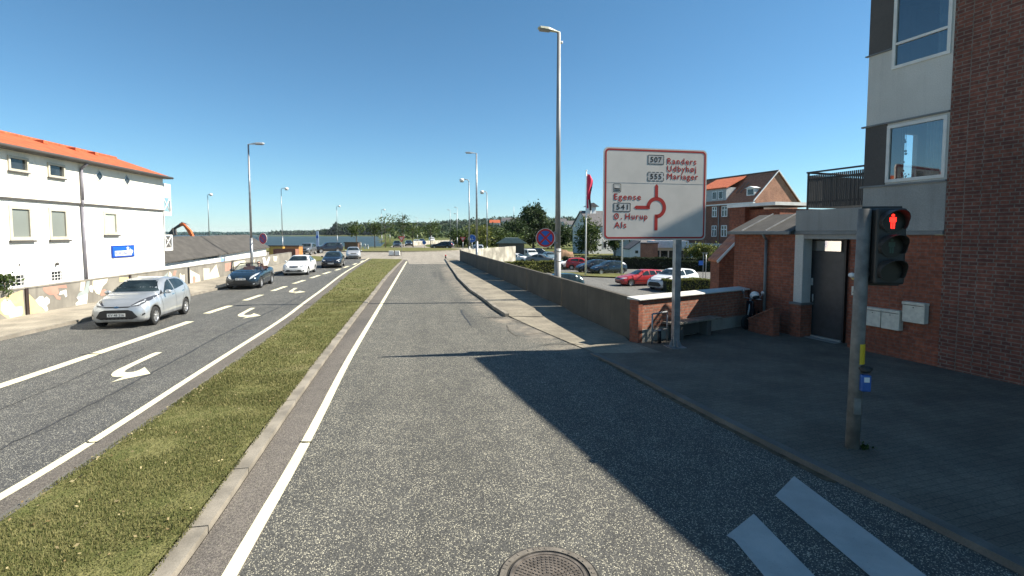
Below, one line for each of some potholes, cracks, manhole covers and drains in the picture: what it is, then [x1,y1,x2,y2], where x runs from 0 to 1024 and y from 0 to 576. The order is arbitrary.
manhole cover [498,547,599,576]
